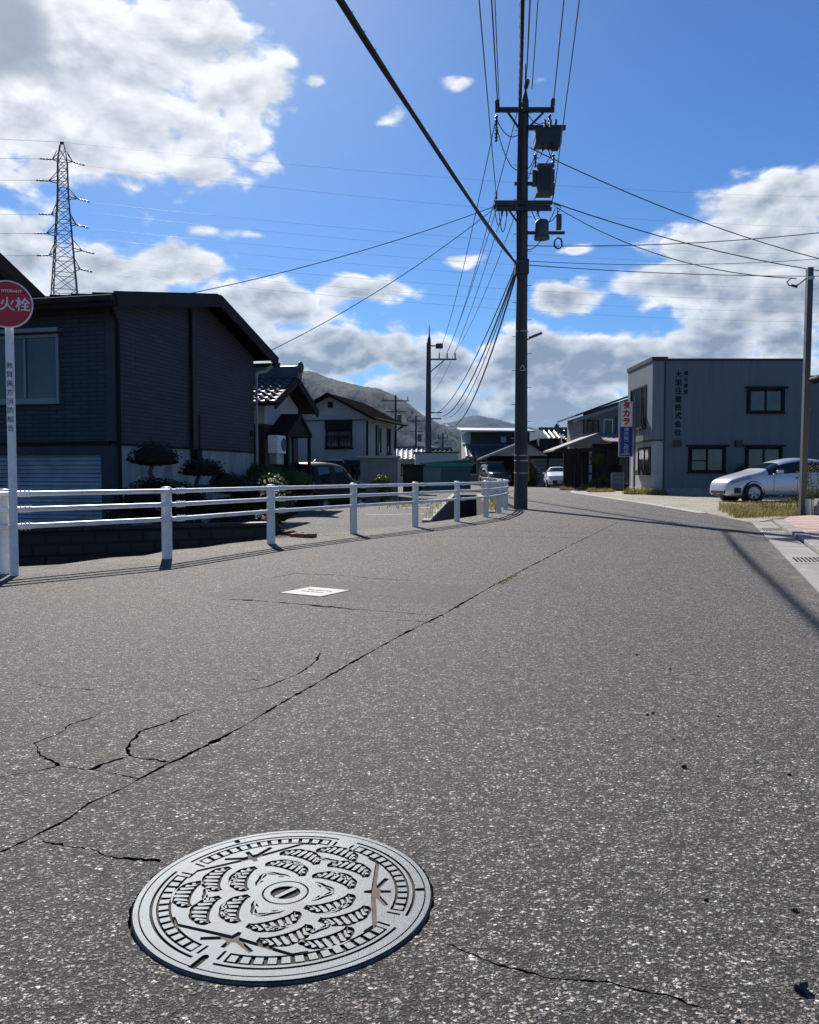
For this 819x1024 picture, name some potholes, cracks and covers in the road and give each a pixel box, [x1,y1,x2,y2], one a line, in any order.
crack [0,522,618,862]
manhole cover [131,830,432,988]
crack [441,942,740,1019]
utility cover [280,587,350,597]
